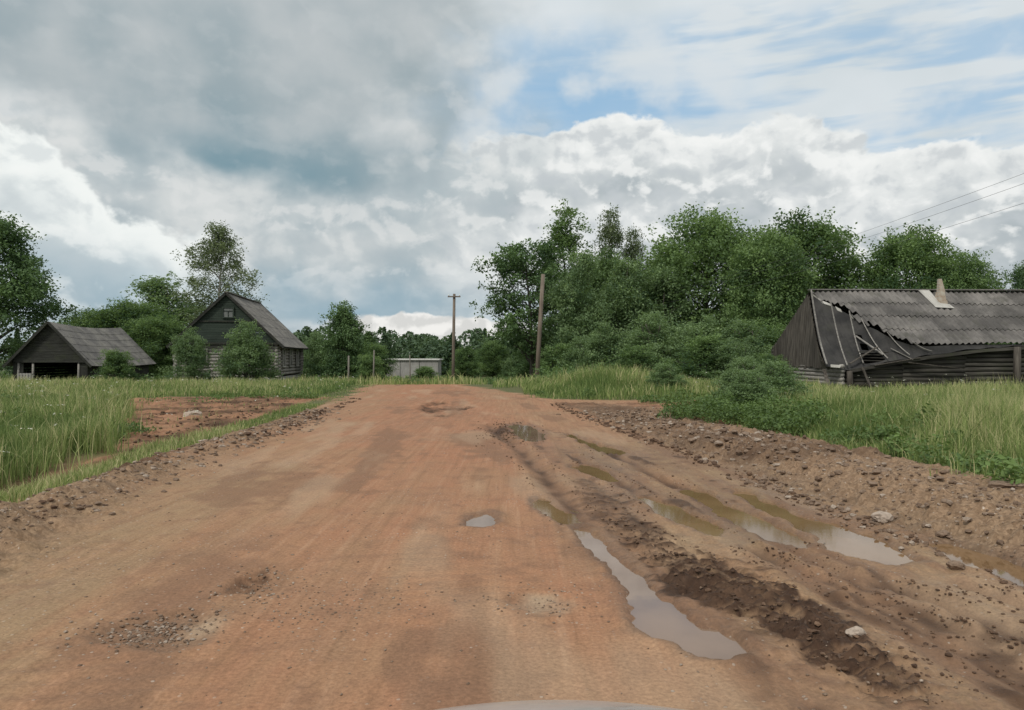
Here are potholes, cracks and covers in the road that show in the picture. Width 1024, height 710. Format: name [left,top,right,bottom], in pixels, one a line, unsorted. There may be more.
pothole [630,495,735,537]
pothole [561,433,633,457]
pothole [418,401,474,417]
pothole [562,461,628,482]
pothole [485,587,587,619]
pothole [674,485,826,549]
pothole [501,422,550,443]
pothole [72,605,239,659]
pothole [726,487,937,566]
pothole [210,564,284,597]
pothole [459,509,503,528]
